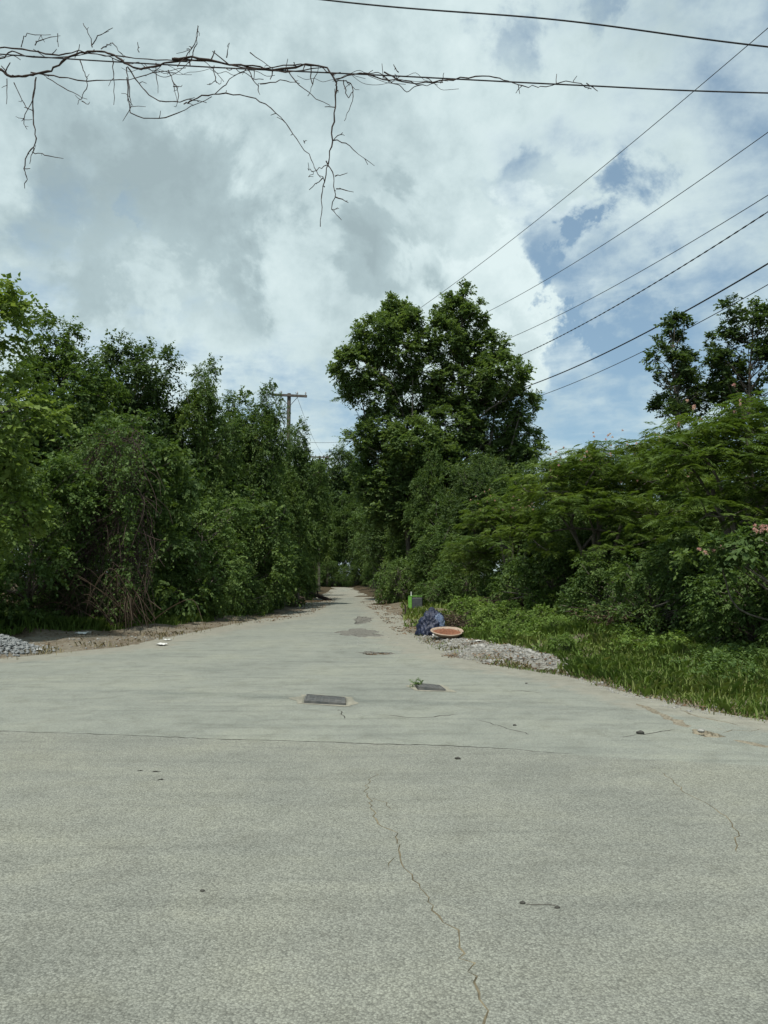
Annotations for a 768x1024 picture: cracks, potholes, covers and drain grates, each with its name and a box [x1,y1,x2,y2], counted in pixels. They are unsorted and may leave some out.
manhole cover [406,683,456,692]
crack [625,704,768,748]
crack [364,774,489,1024]
crack [662,772,740,851]
manhole cover [289,694,358,706]
